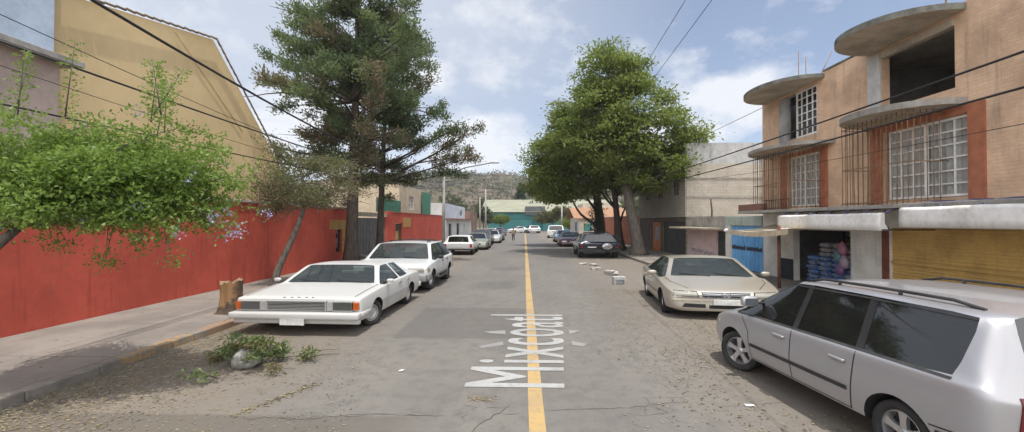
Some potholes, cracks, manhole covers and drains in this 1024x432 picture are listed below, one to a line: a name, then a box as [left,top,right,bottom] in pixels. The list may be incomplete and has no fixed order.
crack [562,397,686,428]
crack [244,399,518,431]
